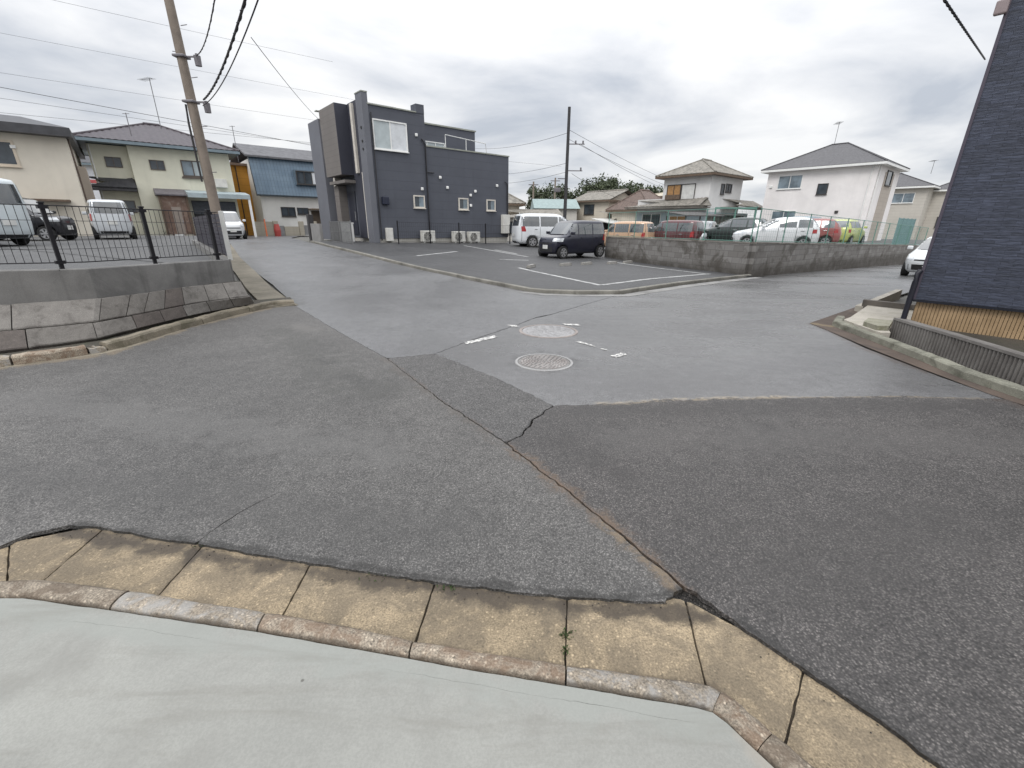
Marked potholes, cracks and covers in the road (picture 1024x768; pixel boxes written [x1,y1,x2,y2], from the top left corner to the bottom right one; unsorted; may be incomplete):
manhole cover [519,324,578,338]
crack [387,358,684,593]
manhole cover [515,354,573,371]
